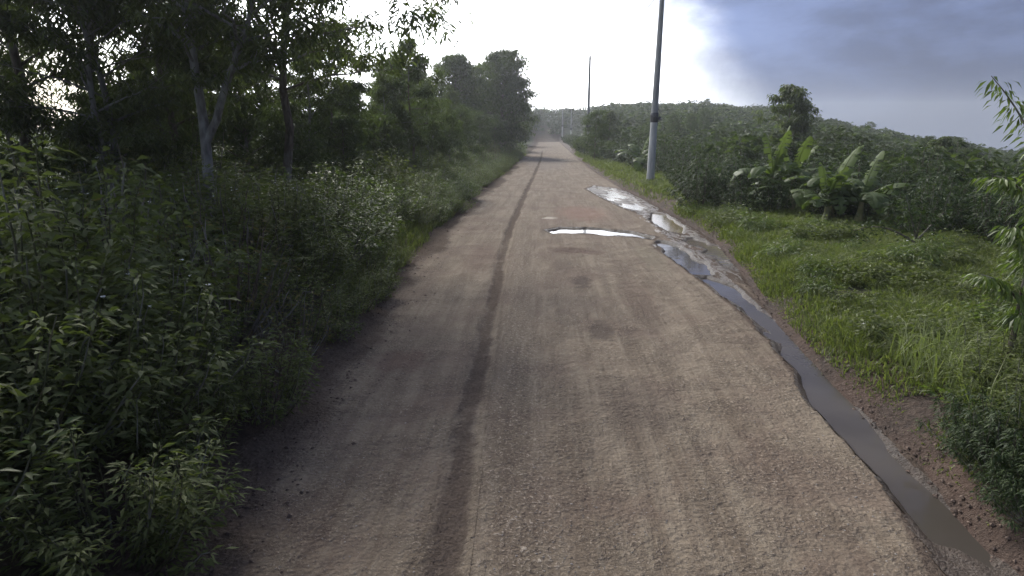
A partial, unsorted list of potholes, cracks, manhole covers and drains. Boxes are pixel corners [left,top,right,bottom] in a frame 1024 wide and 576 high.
pothole [681,236,739,272]
pothole [646,212,687,234]
pothole [654,240,715,276]
pothole [545,227,656,240]
pothole [588,186,649,213]
